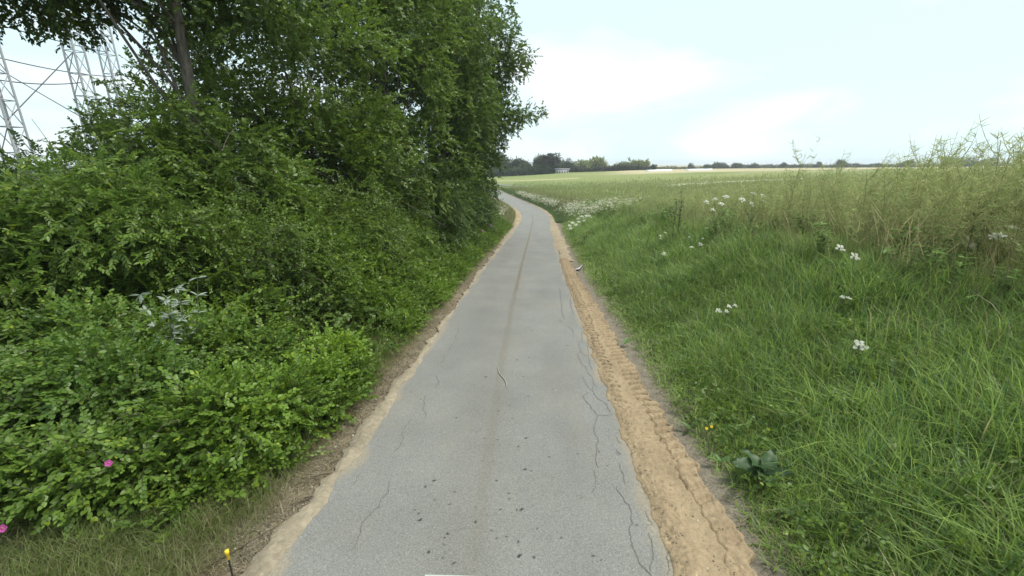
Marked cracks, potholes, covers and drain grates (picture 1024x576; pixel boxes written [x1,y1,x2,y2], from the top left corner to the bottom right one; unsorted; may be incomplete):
crack [354,478,391,548]
crack [559,290,670,576]
